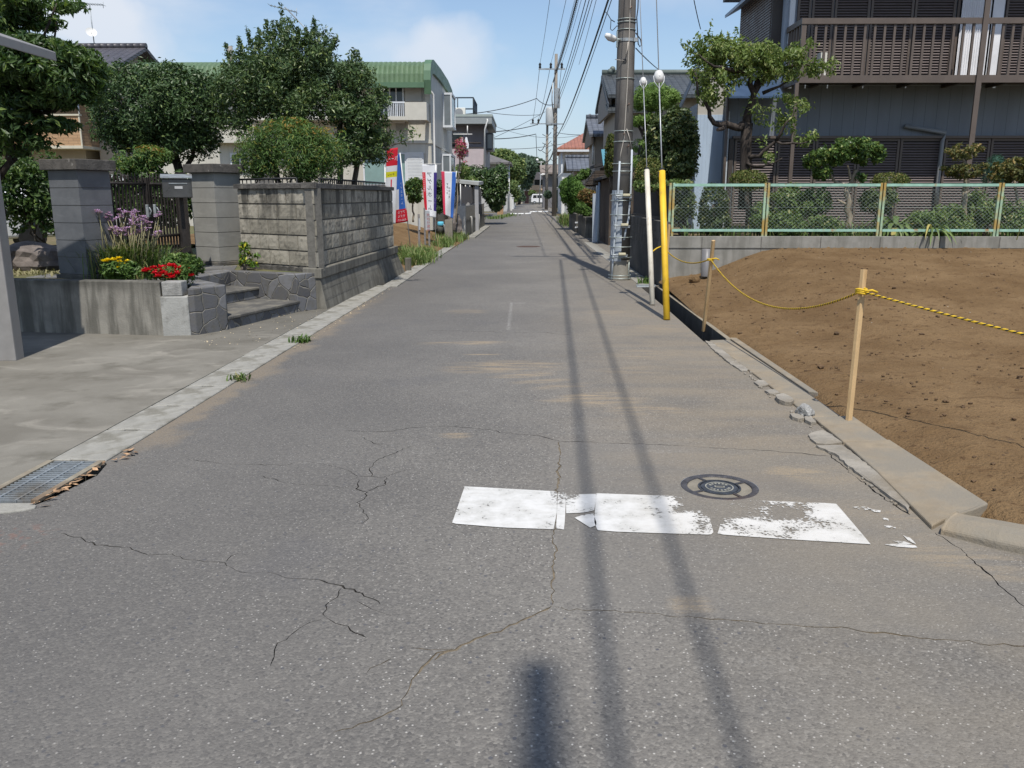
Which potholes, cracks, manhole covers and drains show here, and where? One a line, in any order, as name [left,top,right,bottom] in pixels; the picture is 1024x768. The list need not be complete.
crack [335,606,552,732]
crack [560,607,1024,647]
drain grate [0,460,105,504]
manhole cover [681,474,759,500]
crack [62,533,385,665]
